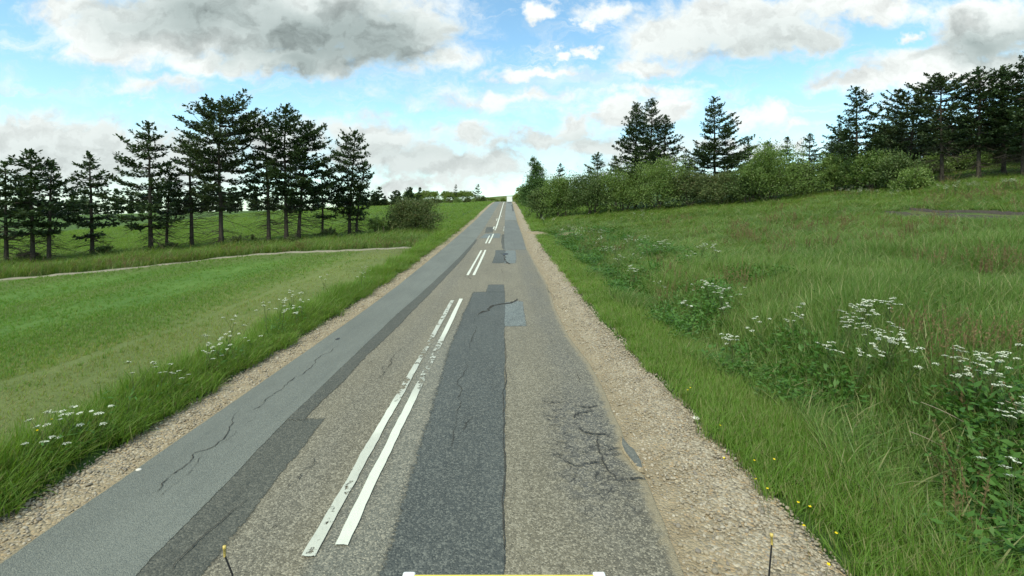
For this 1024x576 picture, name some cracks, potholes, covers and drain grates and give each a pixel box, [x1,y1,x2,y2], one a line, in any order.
crack [160,349,333,496]
crack [542,400,645,479]
crack [471,298,518,341]
